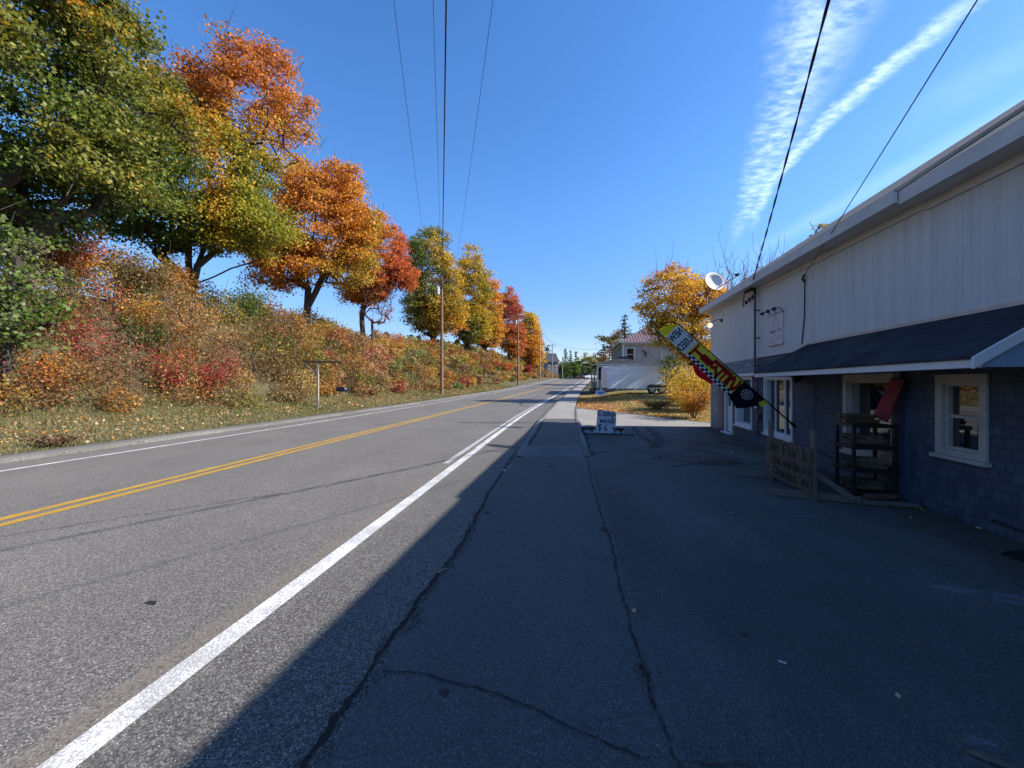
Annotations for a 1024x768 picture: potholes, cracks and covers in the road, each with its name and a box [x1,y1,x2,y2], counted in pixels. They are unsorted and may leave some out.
crack [287,448,757,768]
